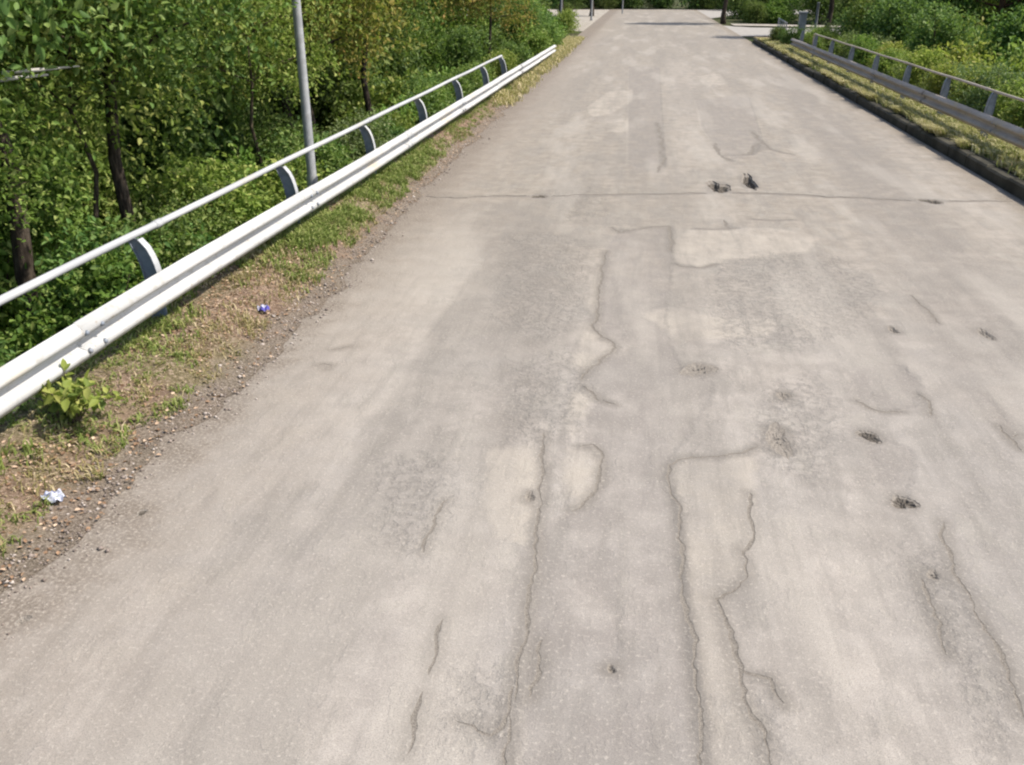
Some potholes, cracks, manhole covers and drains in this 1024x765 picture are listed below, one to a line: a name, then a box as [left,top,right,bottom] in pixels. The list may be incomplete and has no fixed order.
crack [580,251,616,404]
pothole [741,173,759,190]
pothole [976,328,997,341]
crack [407,619,443,755]
pothole [890,495,921,509]
pothole [854,430,882,444]
crack [573,444,604,511]
pothole [679,363,719,377]
crack [656,123,667,173]
crack [713,132,793,161]
crack [665,446,784,765]
pothole [705,181,731,193]
